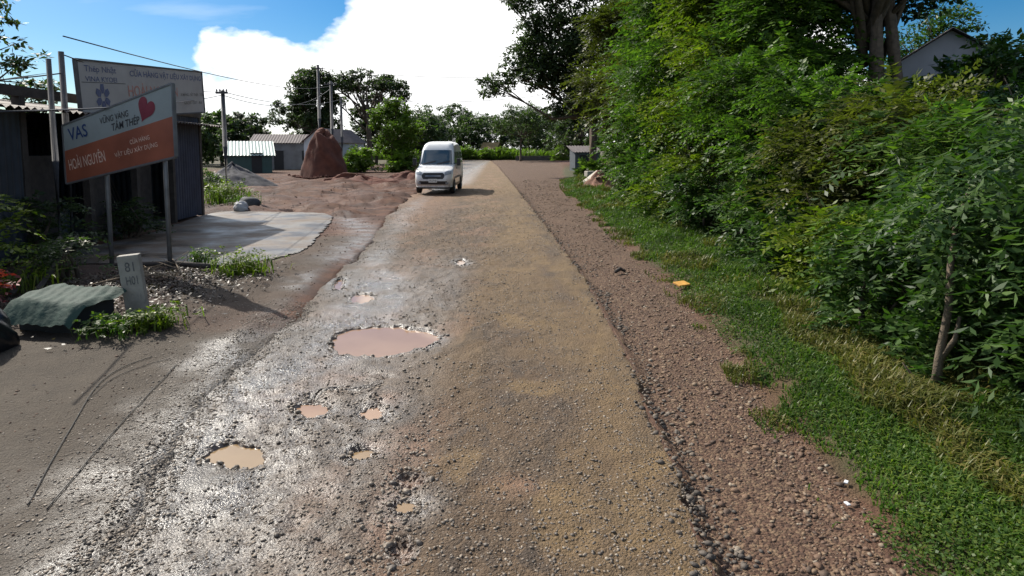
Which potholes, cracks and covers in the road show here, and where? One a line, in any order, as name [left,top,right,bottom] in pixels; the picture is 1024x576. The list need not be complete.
pothole [347,444,377,461]
pothole [326,324,443,358]
pothole [385,498,417,513]
pothole [348,292,377,304]
pothole [194,439,270,471]
pothole [358,402,390,421]
pothole [292,402,333,419]
